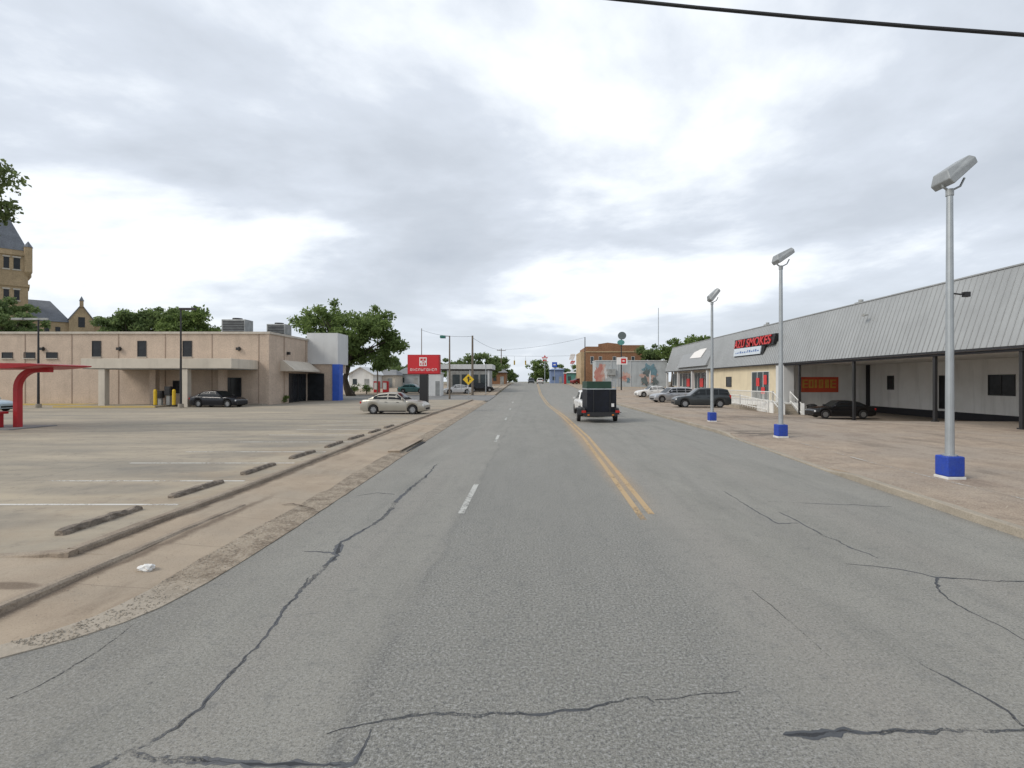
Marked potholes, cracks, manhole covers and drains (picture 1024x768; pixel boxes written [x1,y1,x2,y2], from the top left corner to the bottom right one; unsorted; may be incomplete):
crack [726,492,1024,640]
crack [10,629,127,698]
